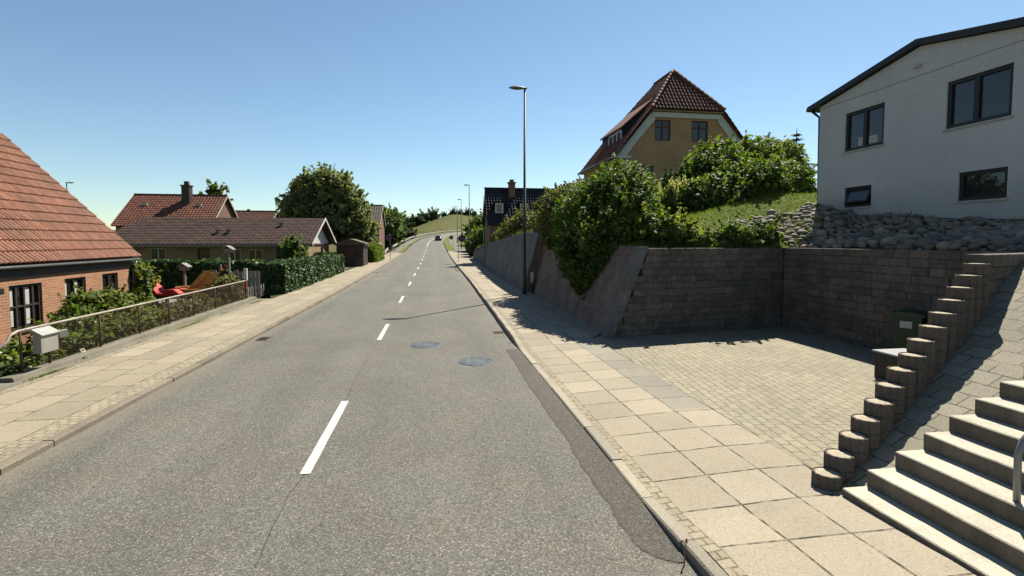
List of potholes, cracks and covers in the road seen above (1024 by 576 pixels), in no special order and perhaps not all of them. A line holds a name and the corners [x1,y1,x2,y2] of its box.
manhole cover [458,357,494,366]
